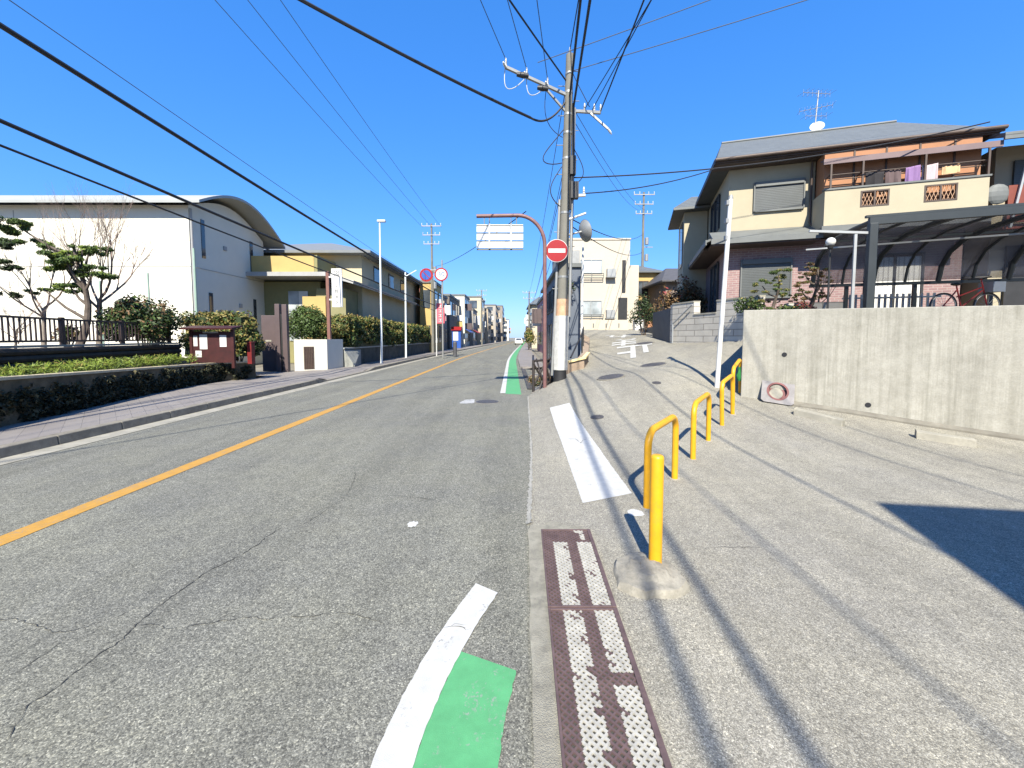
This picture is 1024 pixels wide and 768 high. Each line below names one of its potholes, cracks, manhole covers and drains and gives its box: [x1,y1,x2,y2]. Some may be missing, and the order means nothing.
drain grate [541,529,617,608]
crack [0,476,380,738]
drain grate [548,608,672,768]
